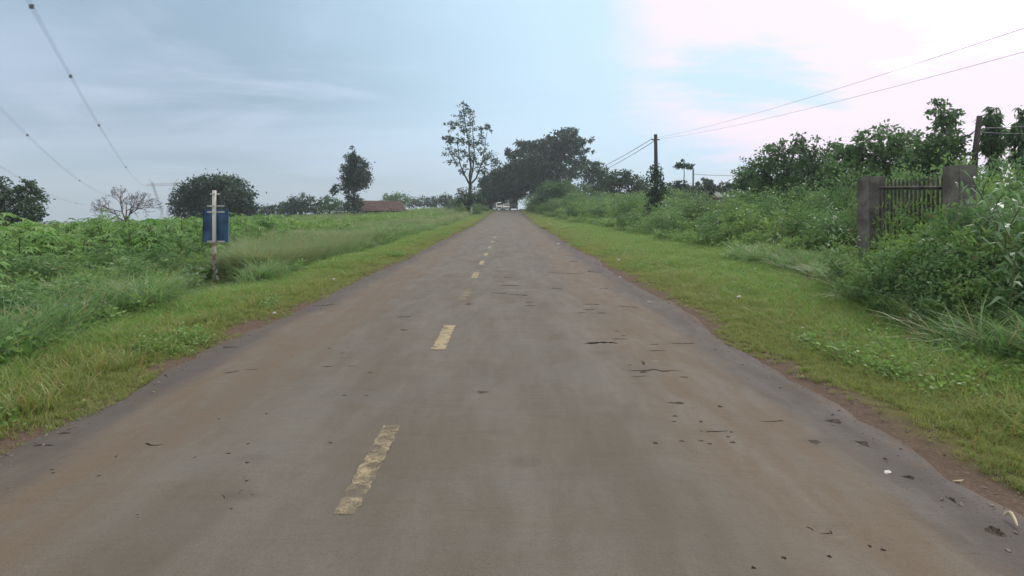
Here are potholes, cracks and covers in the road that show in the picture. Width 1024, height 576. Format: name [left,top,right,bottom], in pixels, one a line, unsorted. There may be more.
pothole [984,525,1007,537]
crack [632,343,693,378]
